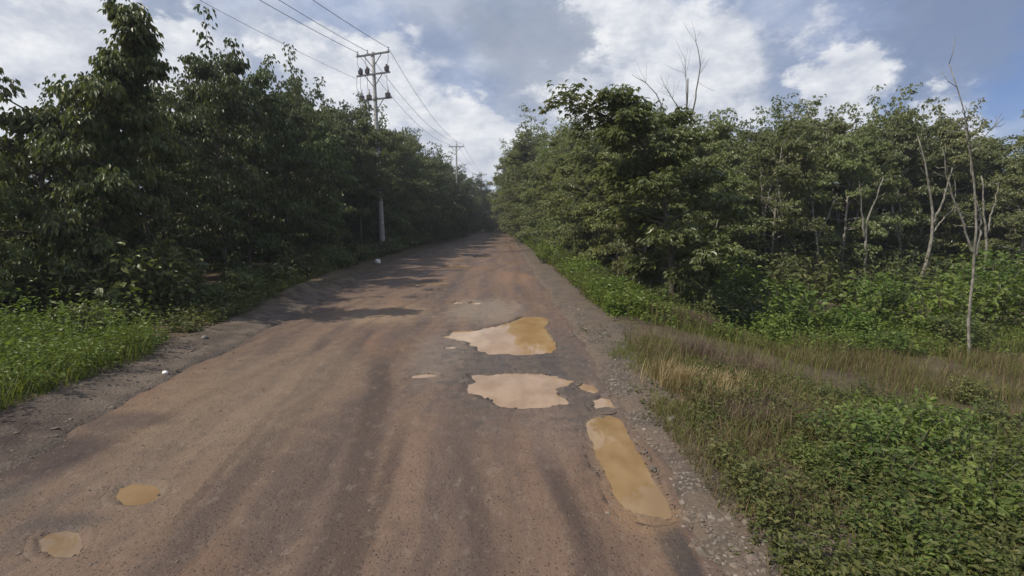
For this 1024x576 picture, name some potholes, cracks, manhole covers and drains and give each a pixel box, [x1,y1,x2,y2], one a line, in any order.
pothole [586,393,623,414]
pothole [23,523,99,563]
pothole [452,367,585,412]
pothole [101,477,174,509]
pothole [570,381,606,394]
pothole [574,407,685,534]
pothole [405,371,444,379]
pothole [435,315,564,357]
